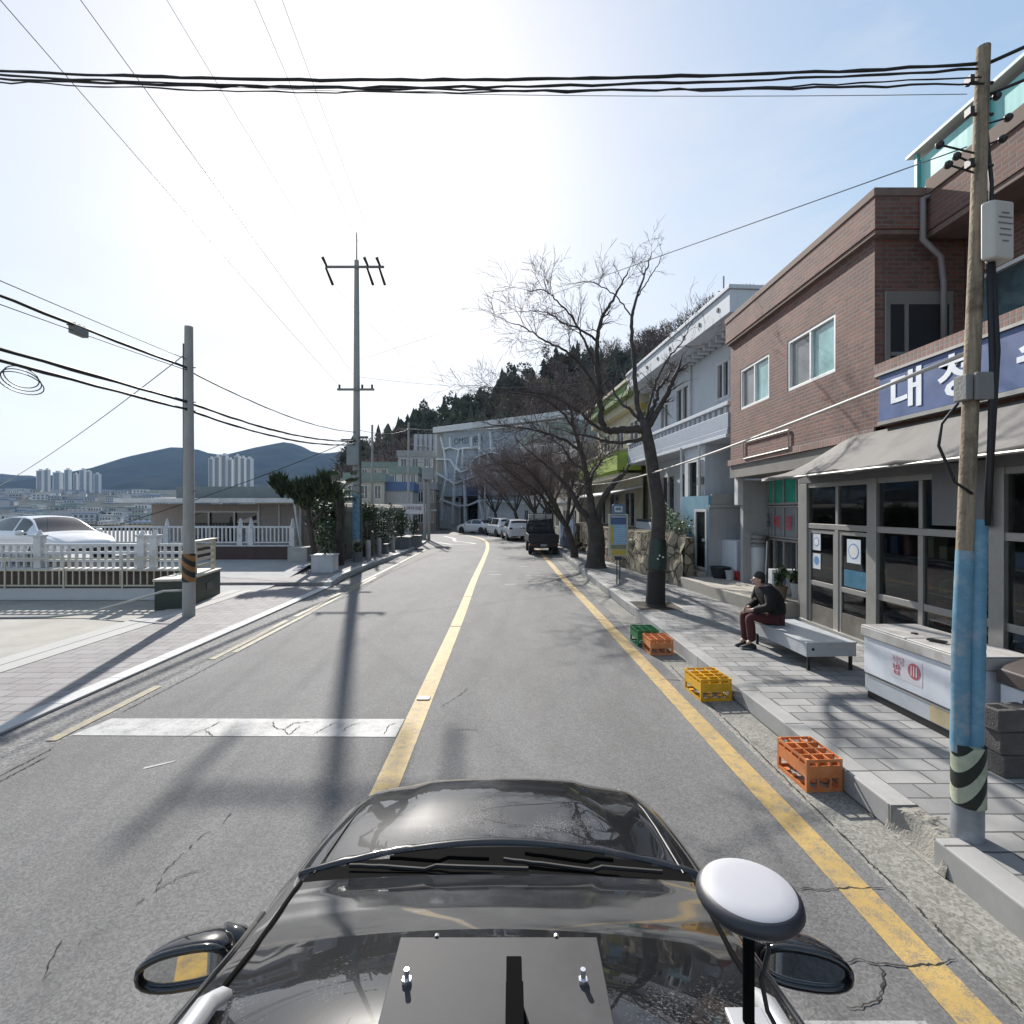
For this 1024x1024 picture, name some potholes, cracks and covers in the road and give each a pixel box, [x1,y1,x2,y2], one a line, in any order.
crack [273,721,396,734]
crack [42,813,231,981]
crack [846,958,956,1008]
